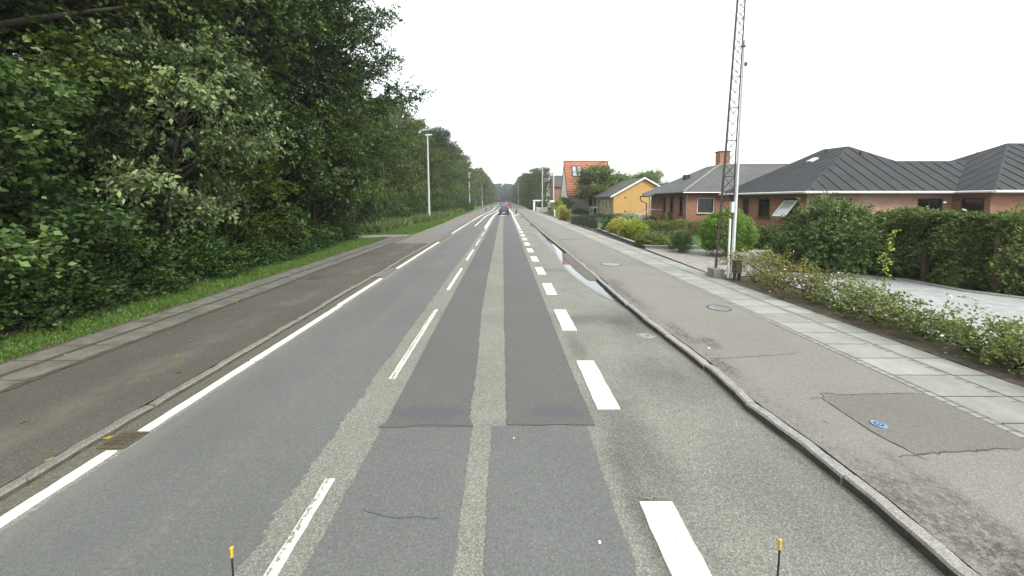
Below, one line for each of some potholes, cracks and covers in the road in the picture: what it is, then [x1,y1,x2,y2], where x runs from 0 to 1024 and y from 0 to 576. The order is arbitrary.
crack [363,508,441,519]
crack [809,393,1019,460]
